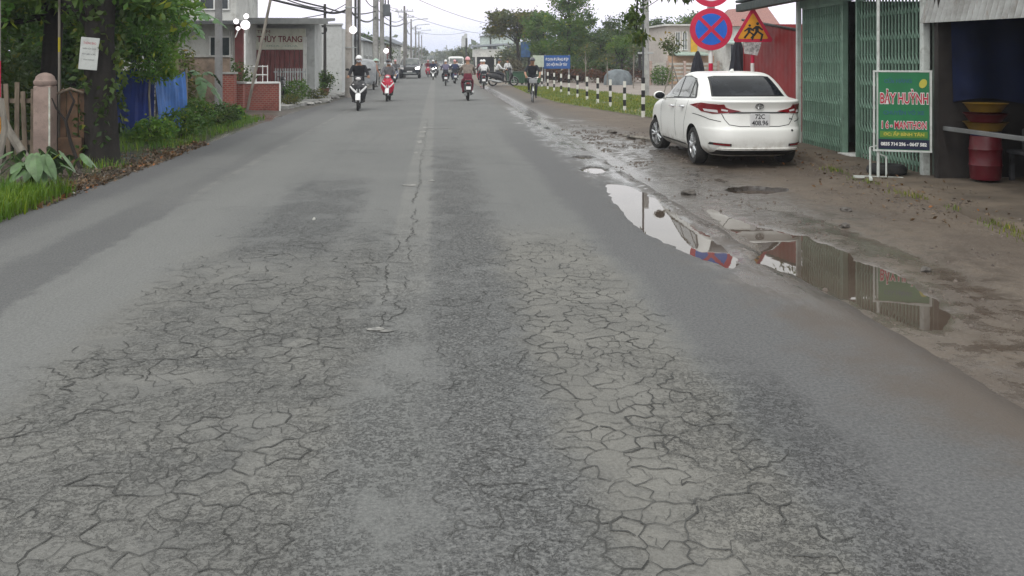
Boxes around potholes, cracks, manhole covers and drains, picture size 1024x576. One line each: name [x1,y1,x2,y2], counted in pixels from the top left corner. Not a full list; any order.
crack [0,193,389,576]
pothole [714,184,801,196]
pothole [571,165,618,175]
crack [414,214,888,576]
